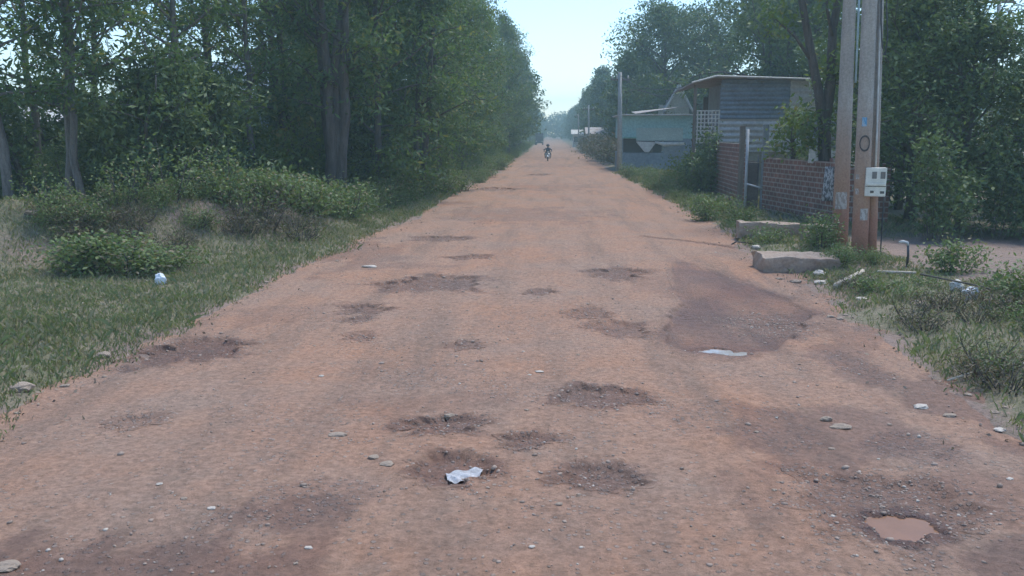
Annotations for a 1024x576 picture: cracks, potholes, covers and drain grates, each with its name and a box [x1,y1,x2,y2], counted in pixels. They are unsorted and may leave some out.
pothole [361,271,489,293]
pothole [521,287,562,295]
pothole [444,338,487,352]
pothole [118,333,268,371]
pothole [545,381,673,412]
pothole [577,266,654,281]
pothole [535,458,663,494]
pothole [576,318,655,338]
pothole [491,428,576,451]
pothole [555,304,619,320]
pothole [332,314,379,325]
